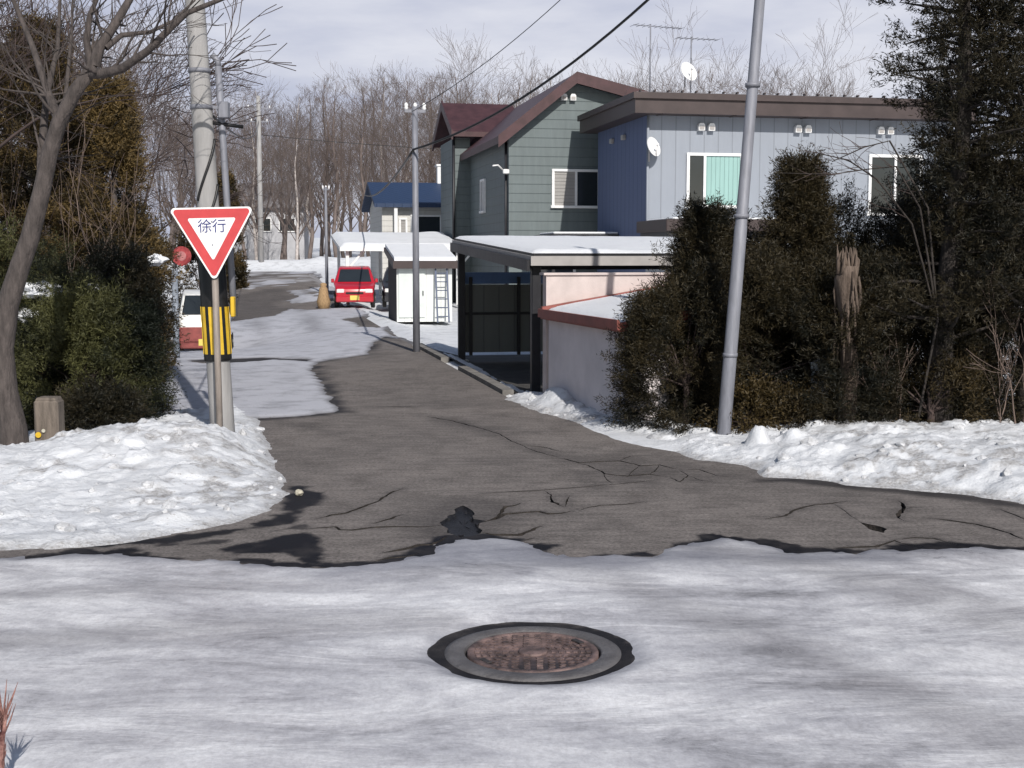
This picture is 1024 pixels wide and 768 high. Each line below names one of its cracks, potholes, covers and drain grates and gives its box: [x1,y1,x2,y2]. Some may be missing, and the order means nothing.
crack [310,489,447,562]
crack [479,491,640,541]
crack [768,501,859,521]
manhole cover [444,626,621,682]
crack [841,501,1024,548]
pothole [438,506,485,537]
crack [433,417,717,485]
